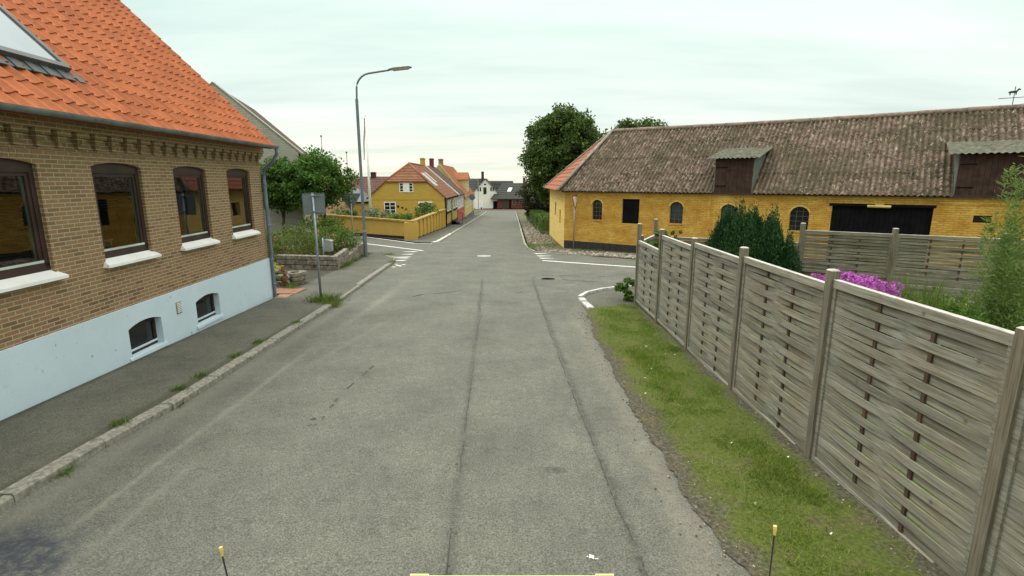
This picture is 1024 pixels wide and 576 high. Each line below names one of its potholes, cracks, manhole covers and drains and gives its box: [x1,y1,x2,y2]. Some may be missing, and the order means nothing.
crack [308,366,374,426]
